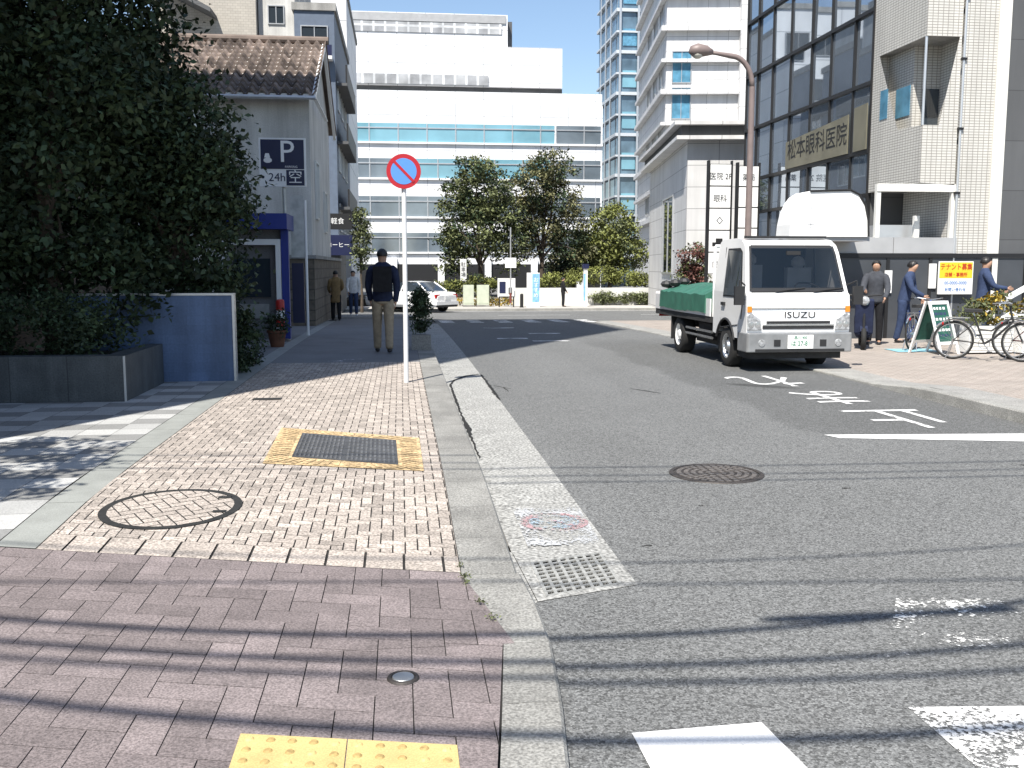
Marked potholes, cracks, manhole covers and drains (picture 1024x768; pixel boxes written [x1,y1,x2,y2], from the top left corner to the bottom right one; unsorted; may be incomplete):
drain grate [530,552,621,602]
manhole cover [669,464,765,484]
manhole cover [97,489,242,529]
crack [449,374,508,458]
